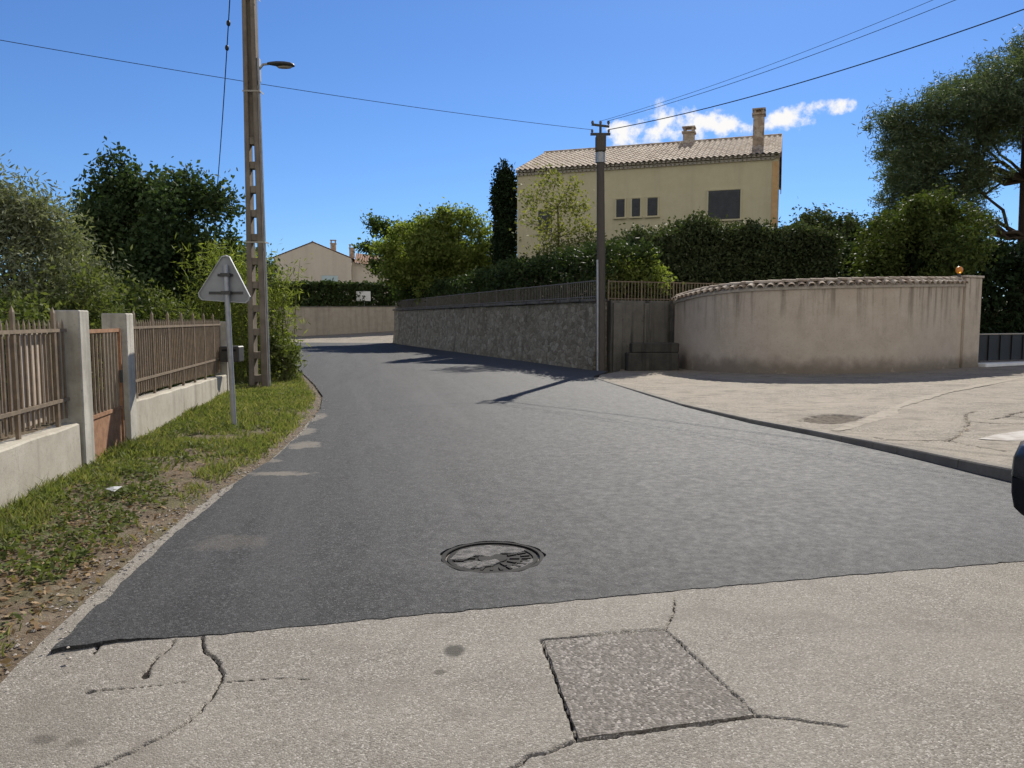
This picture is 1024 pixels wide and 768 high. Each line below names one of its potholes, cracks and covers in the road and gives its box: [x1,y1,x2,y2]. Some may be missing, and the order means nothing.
manhole cover [441,542,544,573]
crack [103,644,185,691]
crack [519,600,754,767]
crack [189,640,301,723]
